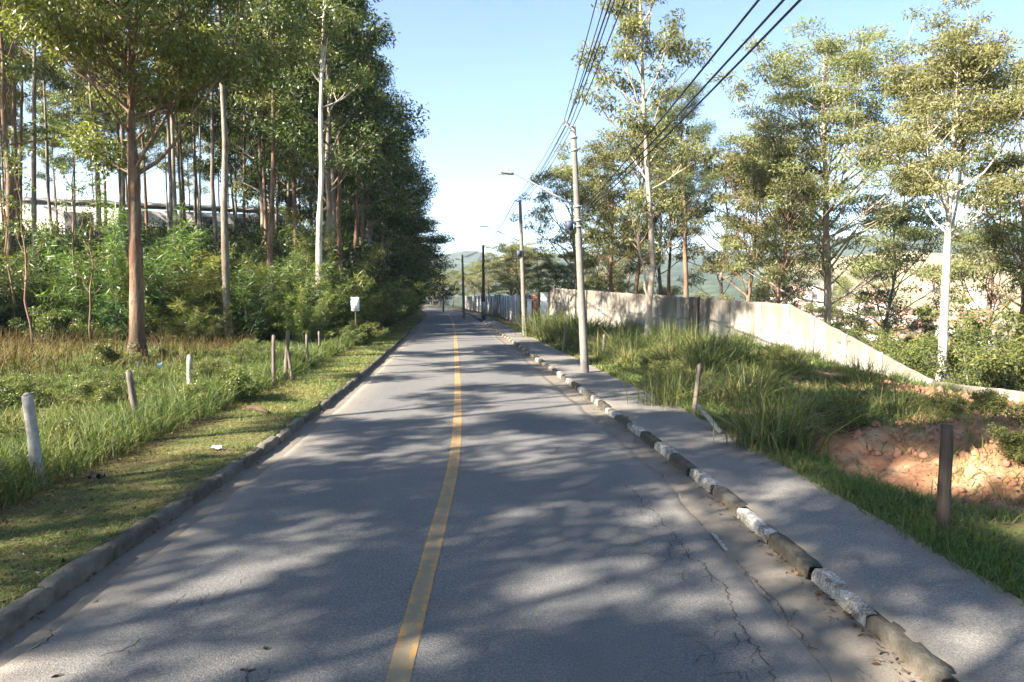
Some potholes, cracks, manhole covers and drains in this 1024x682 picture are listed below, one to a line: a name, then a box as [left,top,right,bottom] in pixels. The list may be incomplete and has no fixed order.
crack [584,486,776,682]
